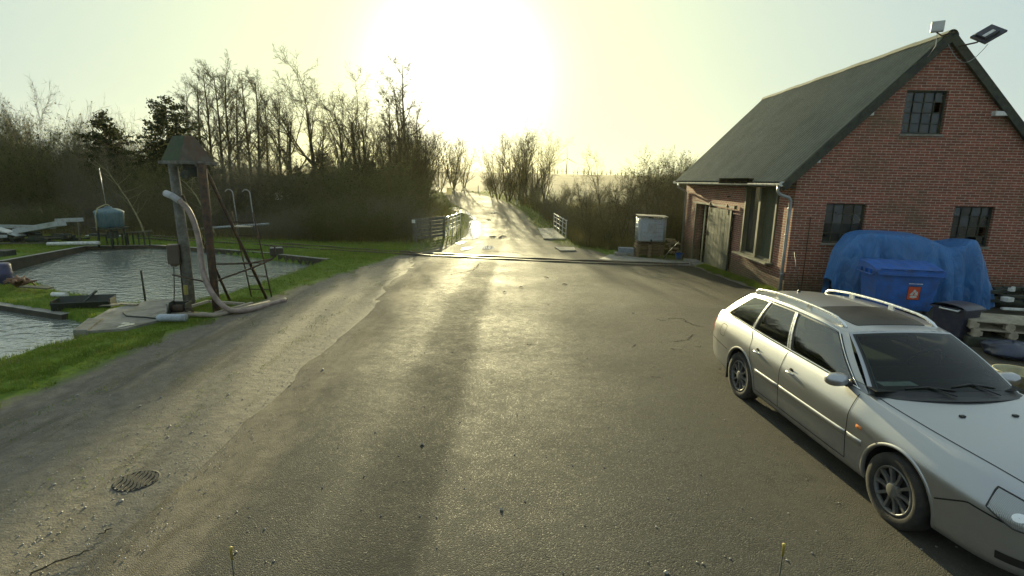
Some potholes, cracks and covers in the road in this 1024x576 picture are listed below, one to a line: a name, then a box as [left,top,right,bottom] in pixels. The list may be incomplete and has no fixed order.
crack [29,528,112,576]
